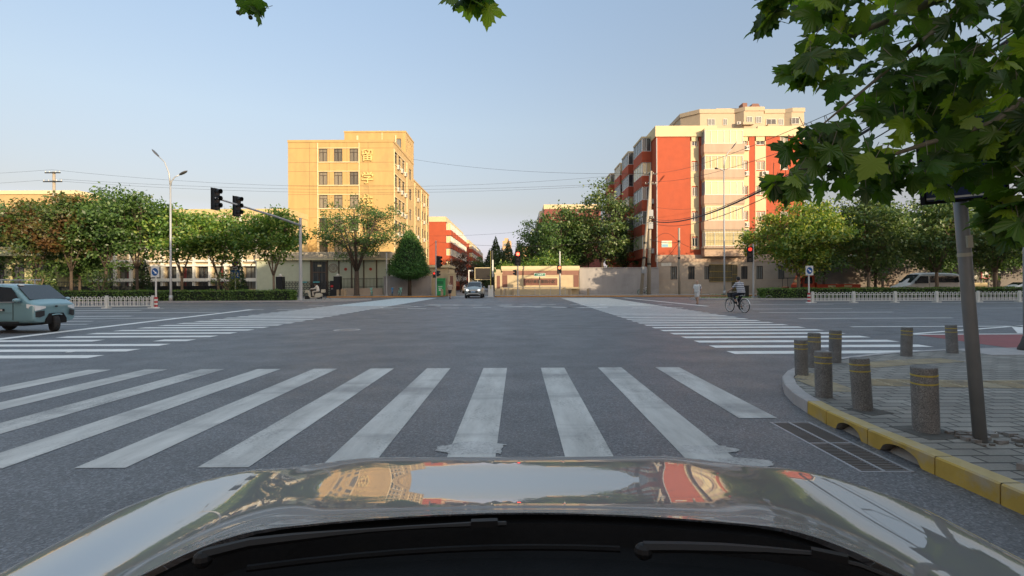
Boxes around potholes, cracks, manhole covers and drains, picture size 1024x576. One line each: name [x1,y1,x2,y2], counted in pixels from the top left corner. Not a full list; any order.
drain grate [769,422,915,472]
